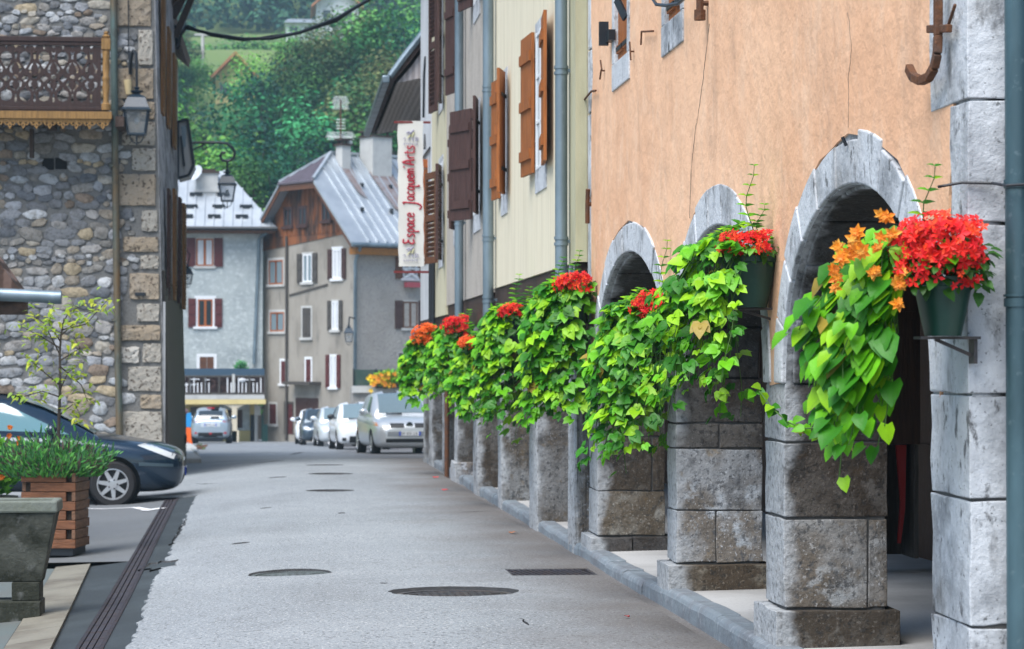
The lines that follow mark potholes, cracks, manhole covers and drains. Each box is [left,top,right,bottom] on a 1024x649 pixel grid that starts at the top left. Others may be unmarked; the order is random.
manhole cover [388,586,519,596]
